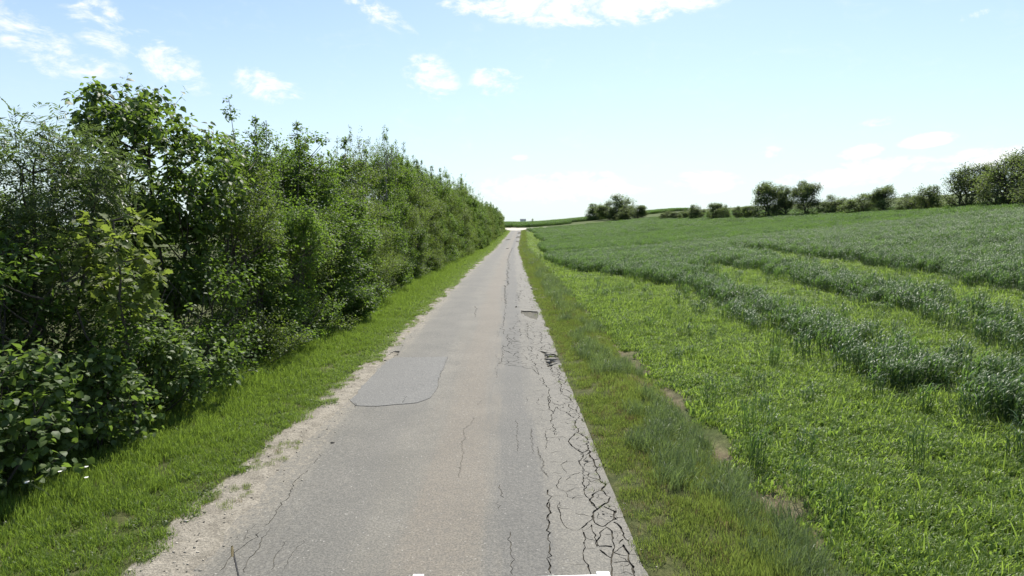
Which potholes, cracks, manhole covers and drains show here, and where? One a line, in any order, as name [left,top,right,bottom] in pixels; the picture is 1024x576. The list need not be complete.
crack [515,363,636,576]
crack [496,279,566,384]
crack [220,454,321,572]
pothole [540,351,560,368]
pothole [521,310,538,320]
